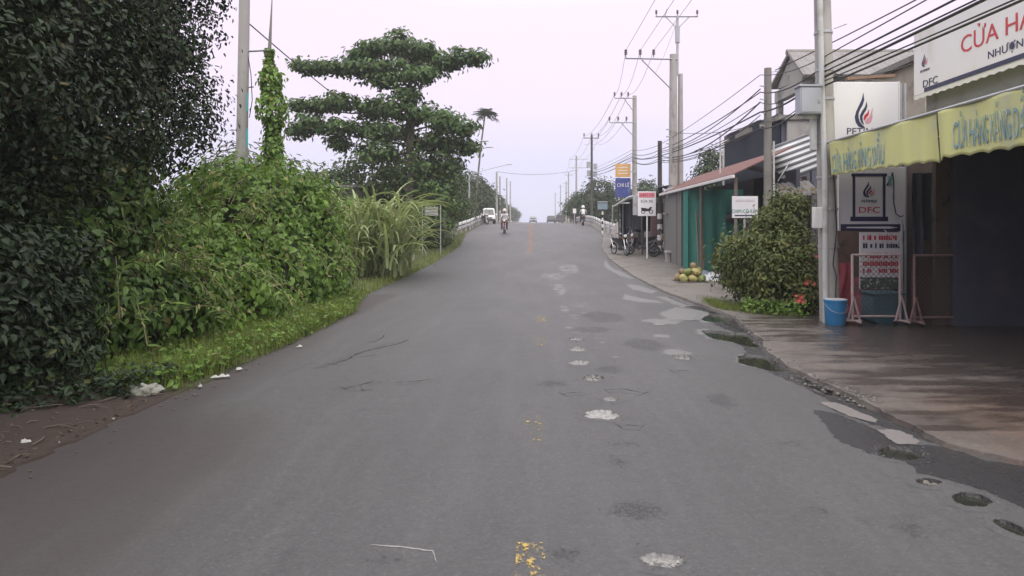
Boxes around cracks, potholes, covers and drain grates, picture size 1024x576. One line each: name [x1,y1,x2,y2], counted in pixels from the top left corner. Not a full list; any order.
pothole [731,353,792,374]
pothole [862,443,938,466]
pothole [575,407,630,423]
pothole [698,329,763,349]
pothole [976,513,1024,542]
pothole [663,352,699,361]
pothole [562,359,597,367]
crack [605,387,649,395]
pothole [936,487,1009,513]
crack [615,422,644,430]
